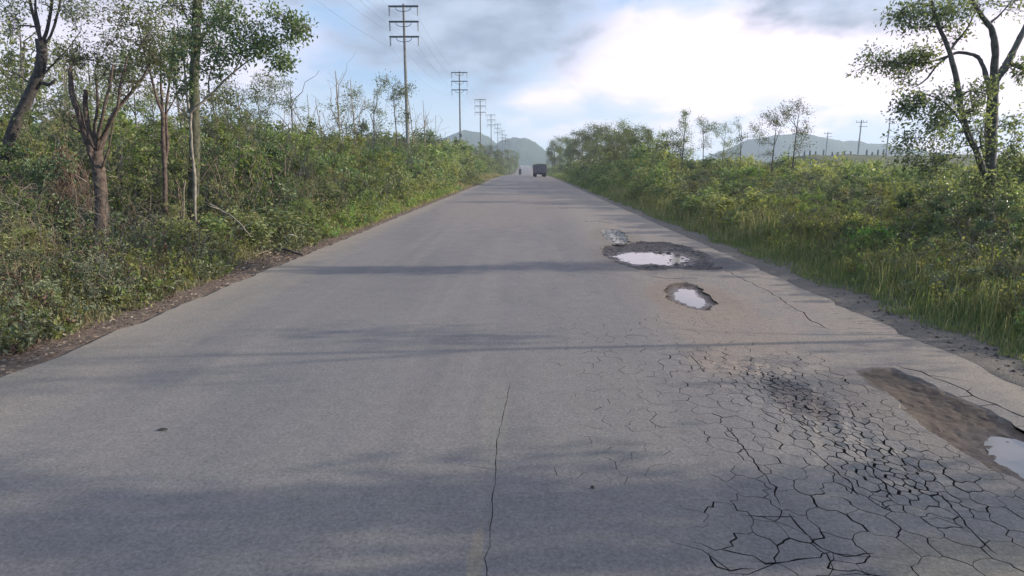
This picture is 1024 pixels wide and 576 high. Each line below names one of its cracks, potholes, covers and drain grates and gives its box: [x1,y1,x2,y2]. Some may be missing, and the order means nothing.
pothole [600,229,630,245]
crack [465,386,510,576]
crack [725,270,830,330]
pothole [855,367,1024,482]
pothole [665,282,717,311]
pothole [599,241,726,271]
crack [899,366,1024,429]
